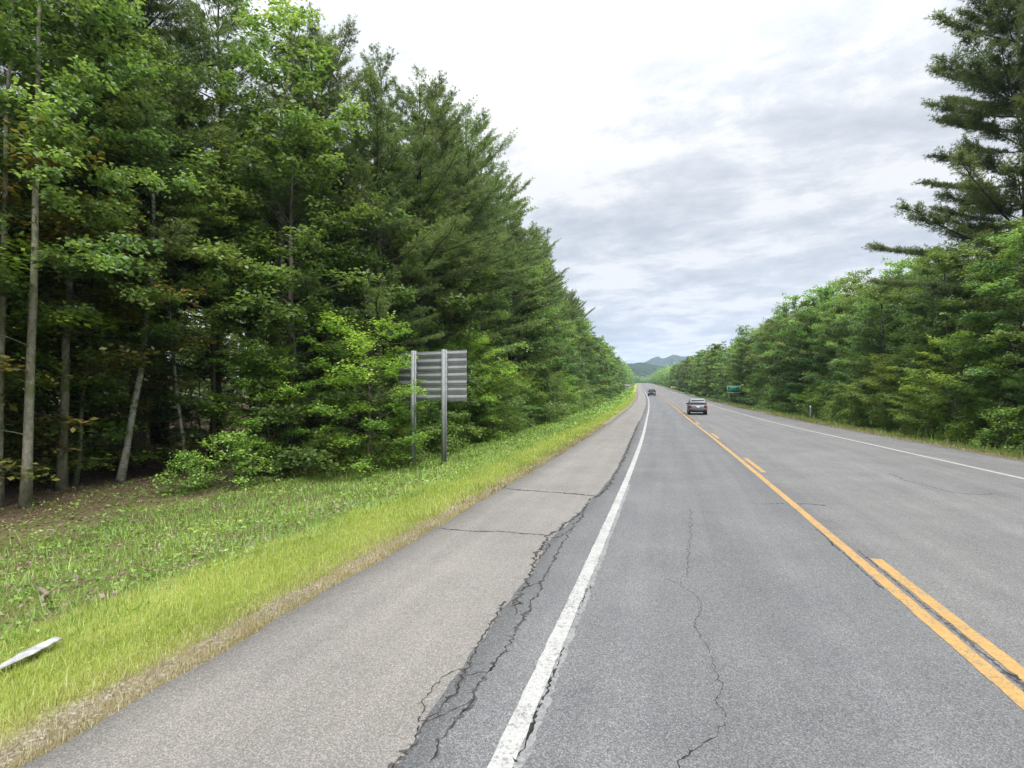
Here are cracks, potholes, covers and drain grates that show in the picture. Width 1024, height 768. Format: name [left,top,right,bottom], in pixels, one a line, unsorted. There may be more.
crack [816,529,883,589]
crack [387,421,640,768]
